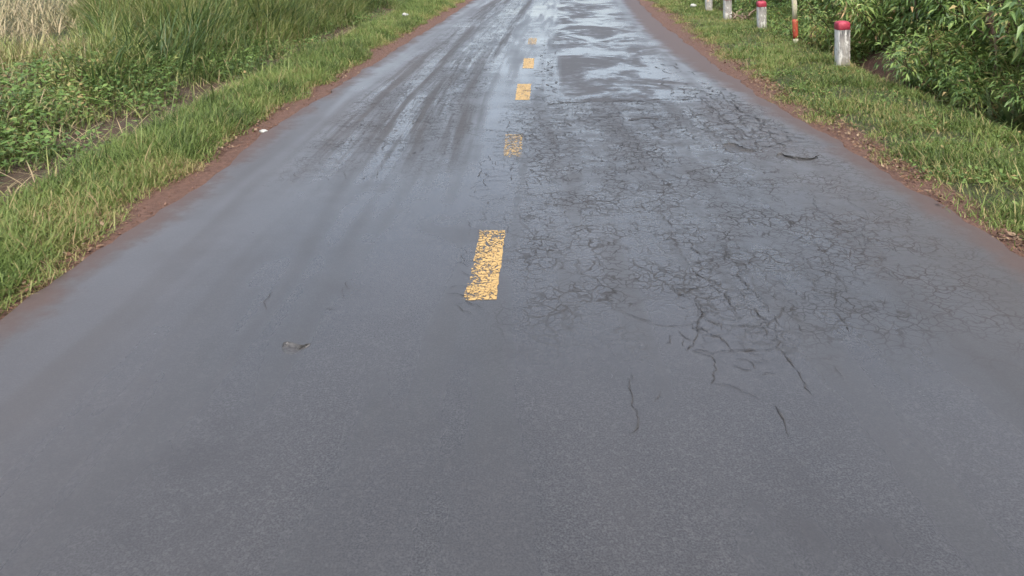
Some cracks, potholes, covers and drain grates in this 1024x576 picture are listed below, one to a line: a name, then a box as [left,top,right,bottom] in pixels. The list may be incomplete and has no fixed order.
pothole [776,153,819,161]
crack [449,32,909,433]
pothole [282,341,311,355]
